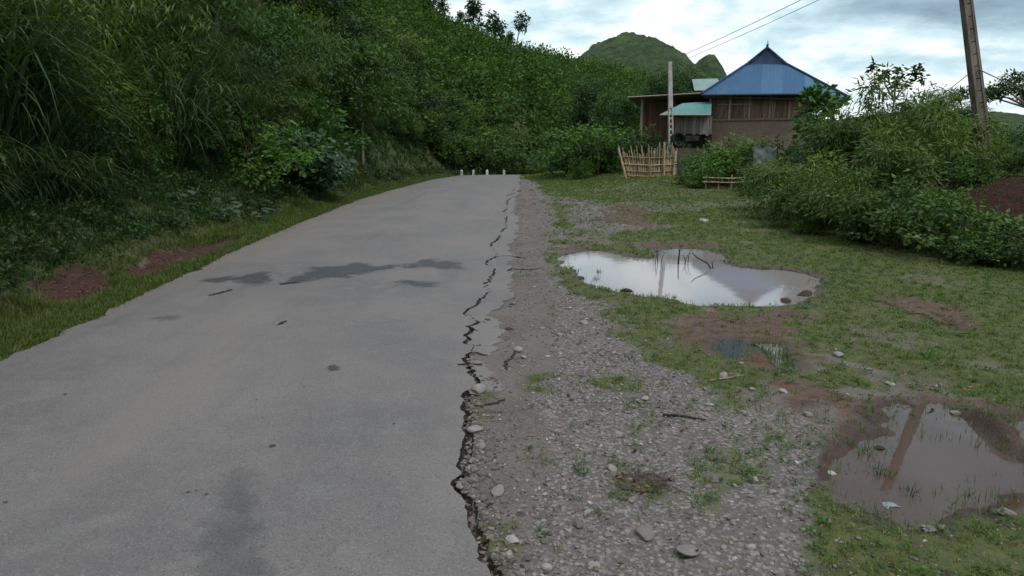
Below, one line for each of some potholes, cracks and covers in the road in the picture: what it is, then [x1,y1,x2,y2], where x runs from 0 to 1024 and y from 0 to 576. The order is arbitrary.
crack [450,189,539,576]
